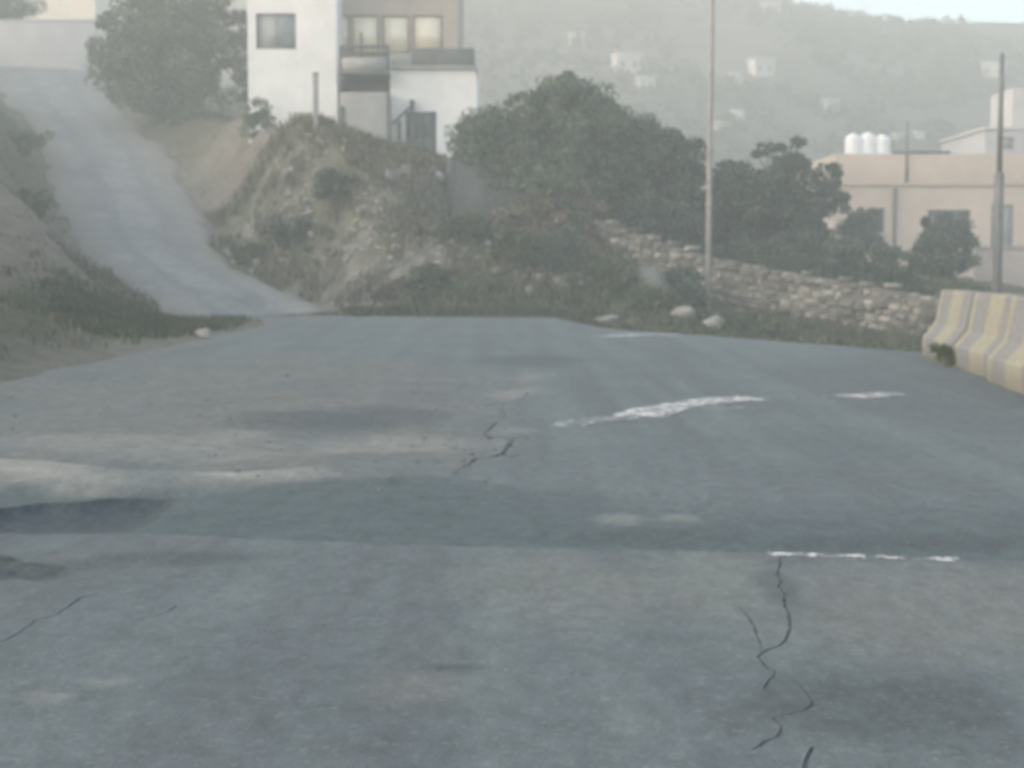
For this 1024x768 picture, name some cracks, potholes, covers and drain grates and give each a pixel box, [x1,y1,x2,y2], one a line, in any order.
pothole [0,555,69,582]
crack [739,557,816,768]
pothole [0,498,177,535]
crack [451,393,563,473]
crack [0,593,101,642]
